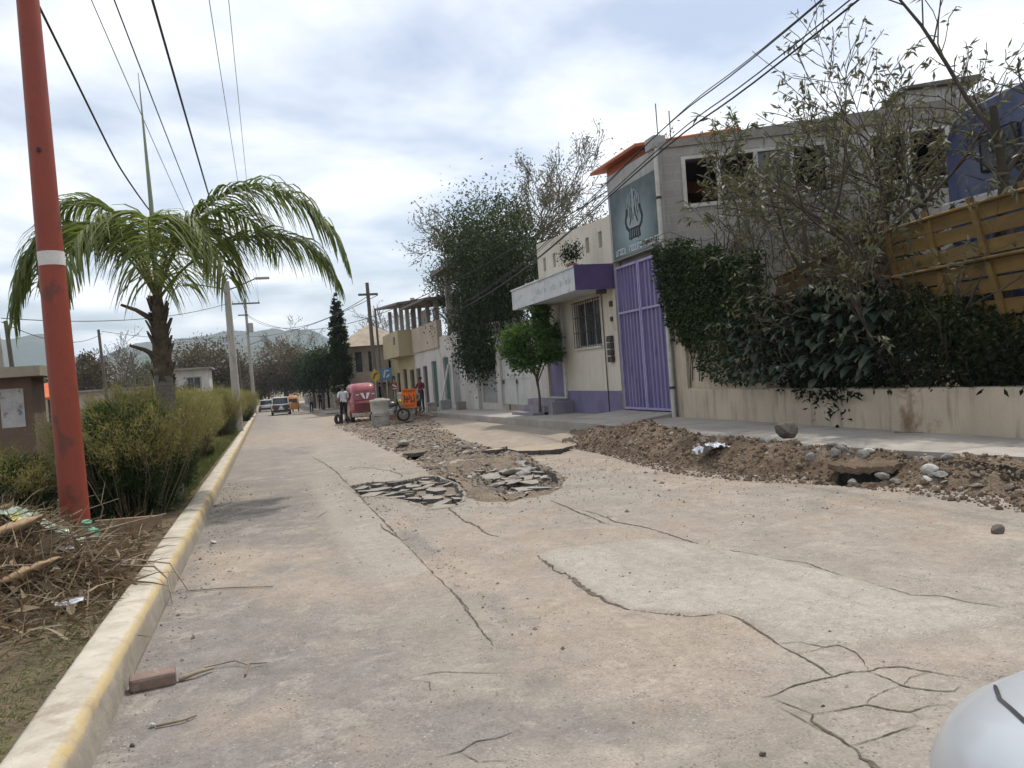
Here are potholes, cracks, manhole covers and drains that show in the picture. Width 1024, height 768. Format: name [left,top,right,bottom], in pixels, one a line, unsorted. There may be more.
pothole [434,453,563,500]
pothole [830,468,908,487]
crack [407,671,512,690]
pothole [345,475,467,510]
crack [437,731,514,761]
crack [537,555,968,768]
crack [315,458,493,645]
crack [551,500,1001,607]
